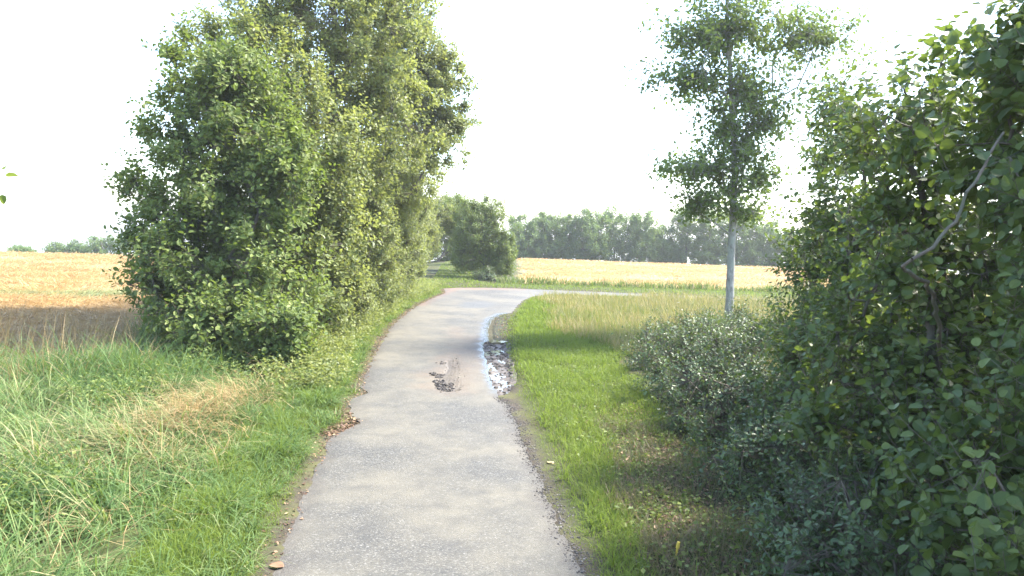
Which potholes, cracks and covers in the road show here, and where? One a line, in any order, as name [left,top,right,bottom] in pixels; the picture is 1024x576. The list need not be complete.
pothole [428,356,488,392]
pothole [483,342,517,401]
